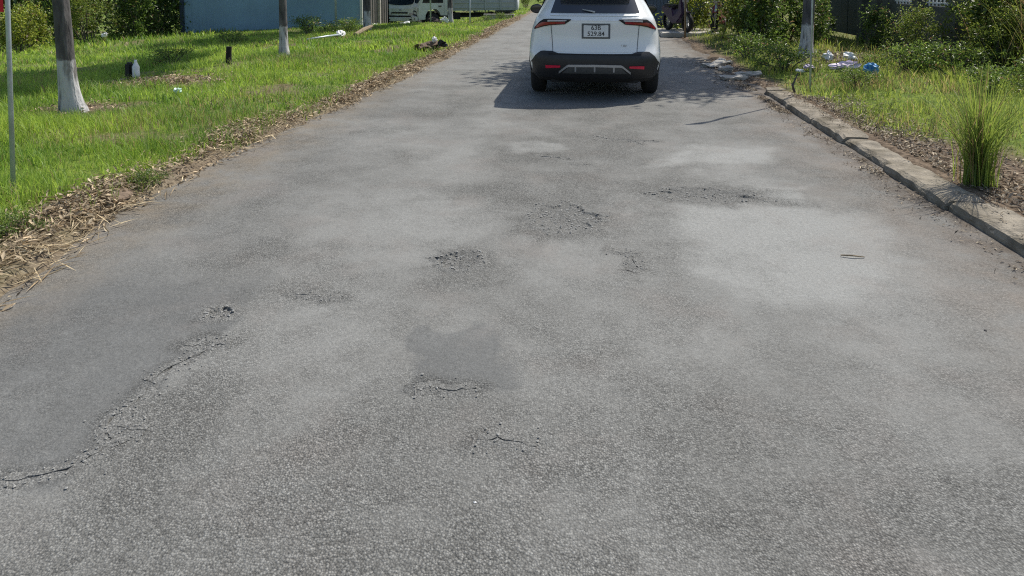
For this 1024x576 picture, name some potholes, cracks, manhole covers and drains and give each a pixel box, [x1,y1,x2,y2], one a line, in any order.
crack [473,422,540,455]
pothole [522,200,612,236]
pothole [425,247,490,273]
pothole [195,302,244,323]
pothole [643,186,777,203]
crack [0,334,232,494]
